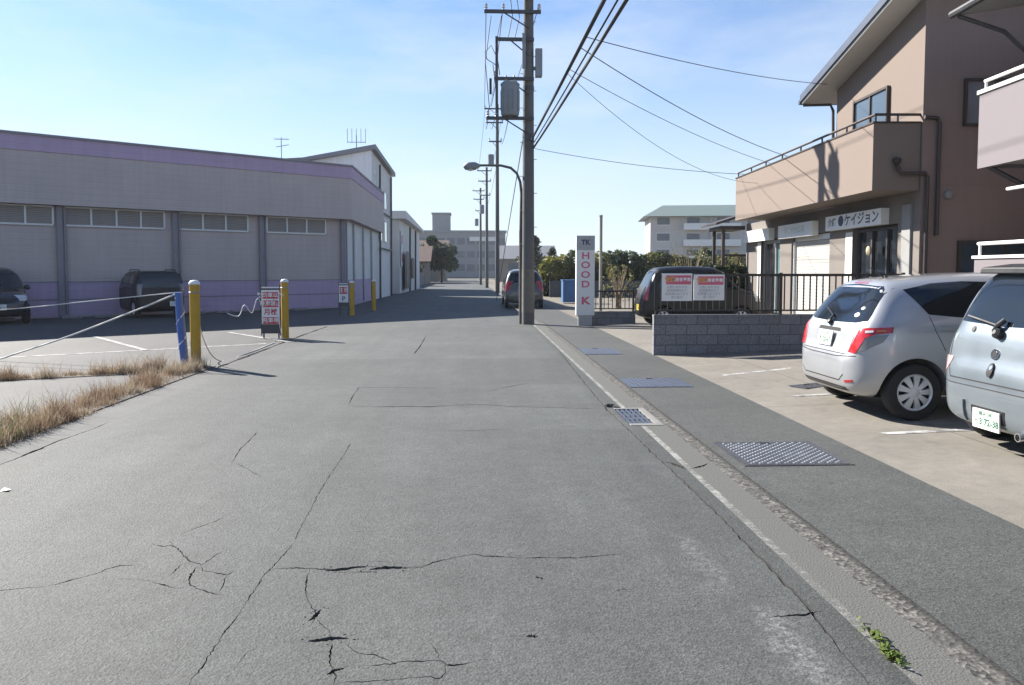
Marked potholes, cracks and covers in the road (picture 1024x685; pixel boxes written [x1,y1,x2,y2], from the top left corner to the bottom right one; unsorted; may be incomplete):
crack [268,531,621,685]
manhole cover [619,378,694,388]
manhole cover [713,441,855,467]
crack [0,518,249,596]
drain grate [613,408,664,426]
